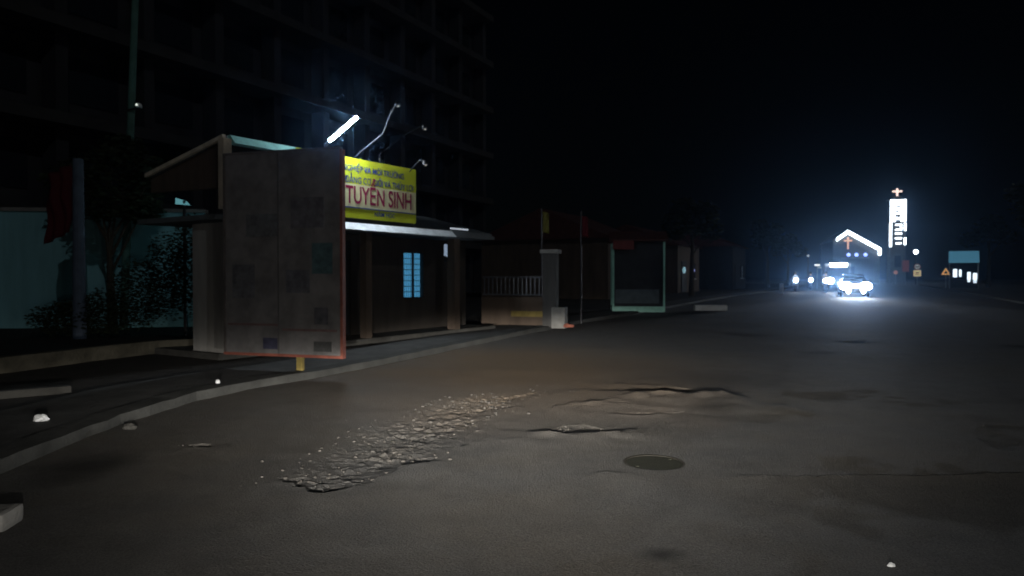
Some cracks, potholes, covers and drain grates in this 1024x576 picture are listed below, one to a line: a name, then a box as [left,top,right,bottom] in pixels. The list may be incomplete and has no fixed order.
pothole [277,389,553,493]
manhole cover [623,455,685,470]
pothole [546,424,613,434]
pothole [973,423,1024,453]
